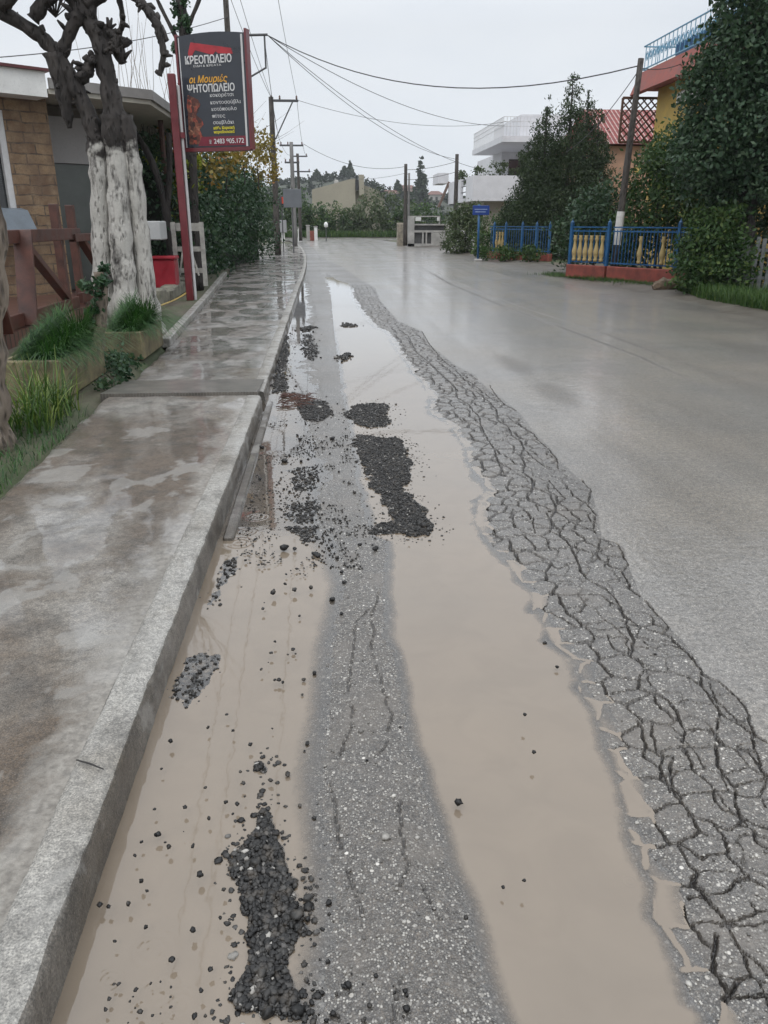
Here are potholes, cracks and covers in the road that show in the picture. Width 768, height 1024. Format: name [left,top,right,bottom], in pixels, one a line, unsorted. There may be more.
crack [346,868,364,917]
crack [390,976,403,1024]
crack [352,284,768,1012]
crack [337,588,395,767]
